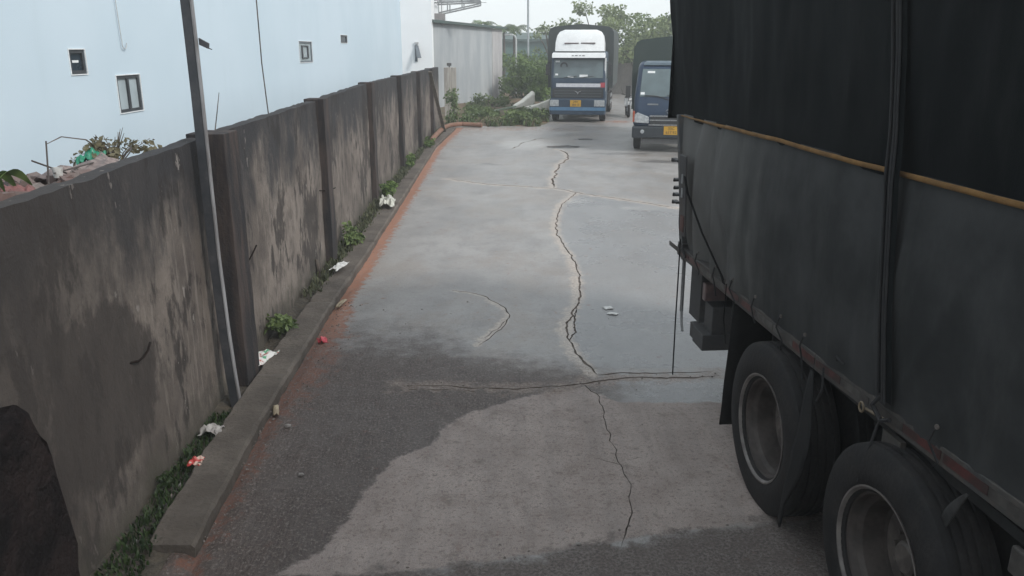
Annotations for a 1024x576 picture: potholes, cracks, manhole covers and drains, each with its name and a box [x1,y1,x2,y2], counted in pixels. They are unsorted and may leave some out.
crack [409,150,718,547]
